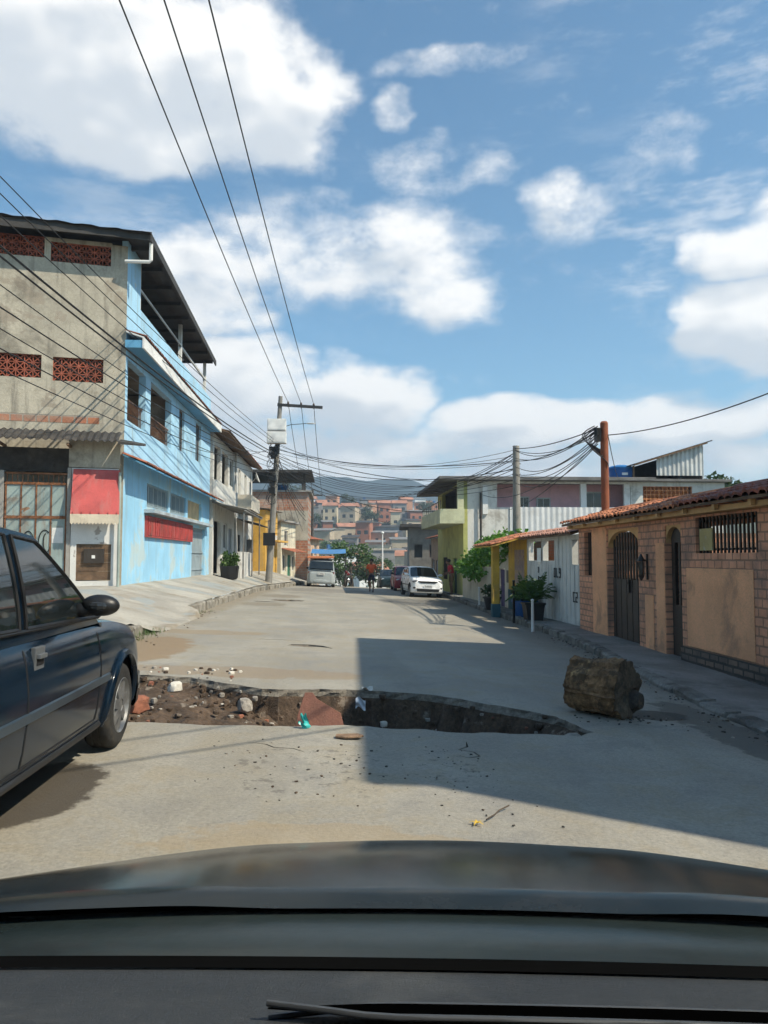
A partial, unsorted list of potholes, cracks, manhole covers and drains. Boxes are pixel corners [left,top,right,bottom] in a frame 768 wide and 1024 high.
pothole [128,675,593,736]
